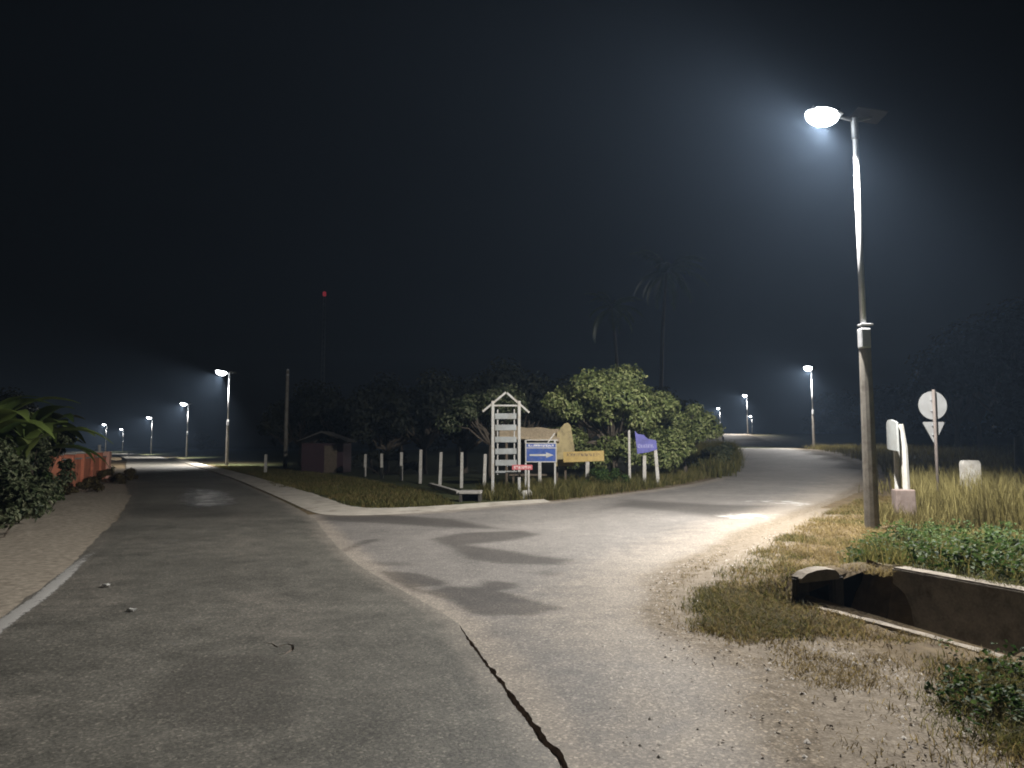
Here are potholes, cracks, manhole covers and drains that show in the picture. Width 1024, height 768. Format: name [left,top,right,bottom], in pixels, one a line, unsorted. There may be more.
crack [269,643,294,655]
crack [460,626,568,768]
